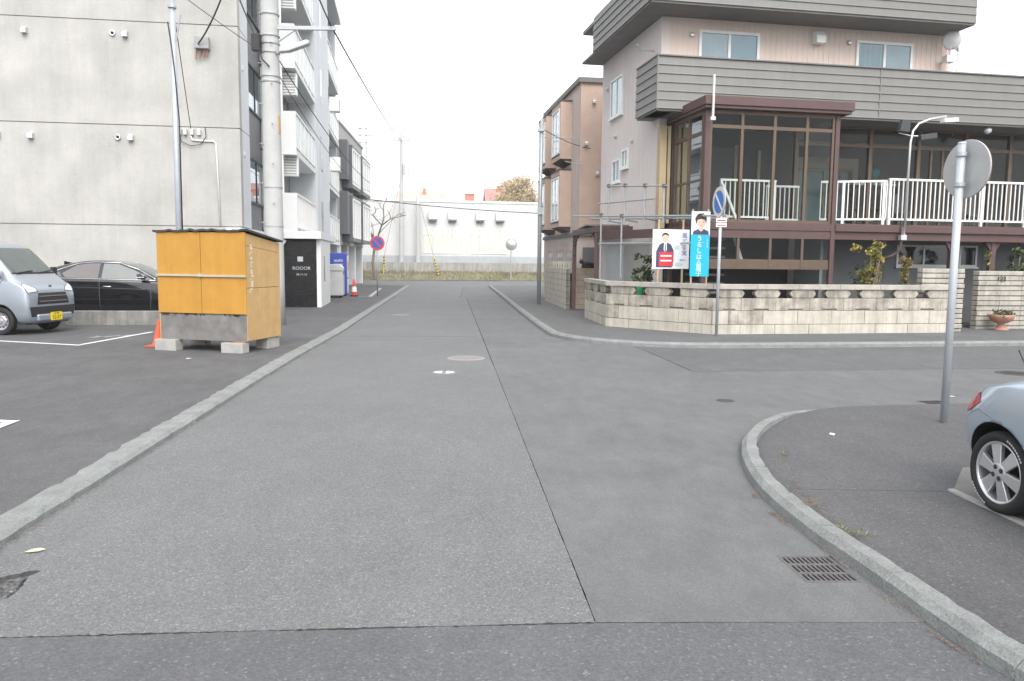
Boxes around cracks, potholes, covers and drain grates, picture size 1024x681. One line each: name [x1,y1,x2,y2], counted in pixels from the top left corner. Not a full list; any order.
drain grate [777,556,863,582]
pothole [0,570,40,601]
